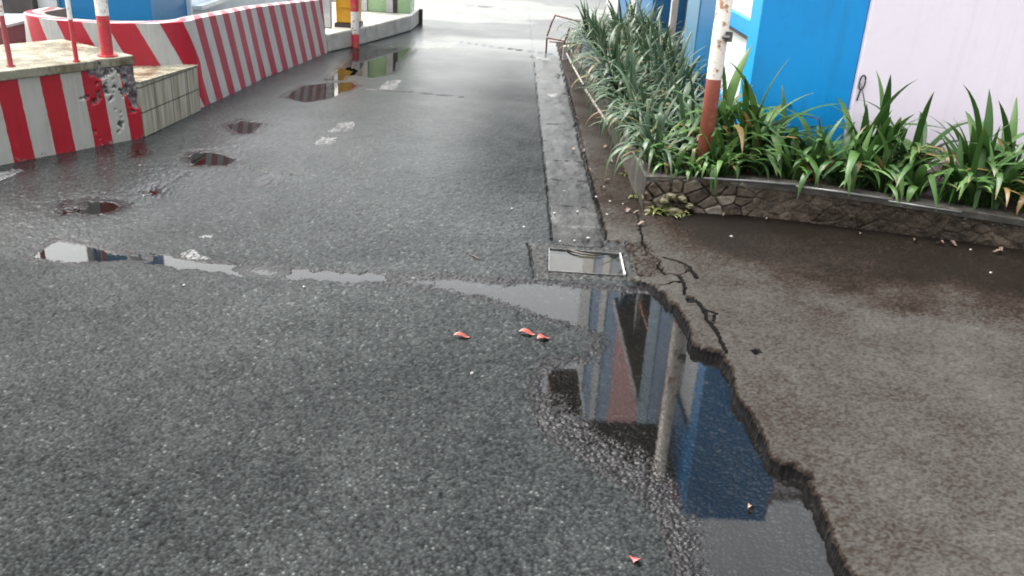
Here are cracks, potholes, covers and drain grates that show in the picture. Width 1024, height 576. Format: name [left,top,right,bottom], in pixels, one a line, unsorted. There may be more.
pothole [386,271,851,576]
pothole [75,197,136,217]
pothole [277,81,363,104]
pothole [53,198,77,217]
manhole cover [530,241,638,280]
pothole [220,118,268,135]
pothole [180,149,247,168]
crack [638,224,728,354]
